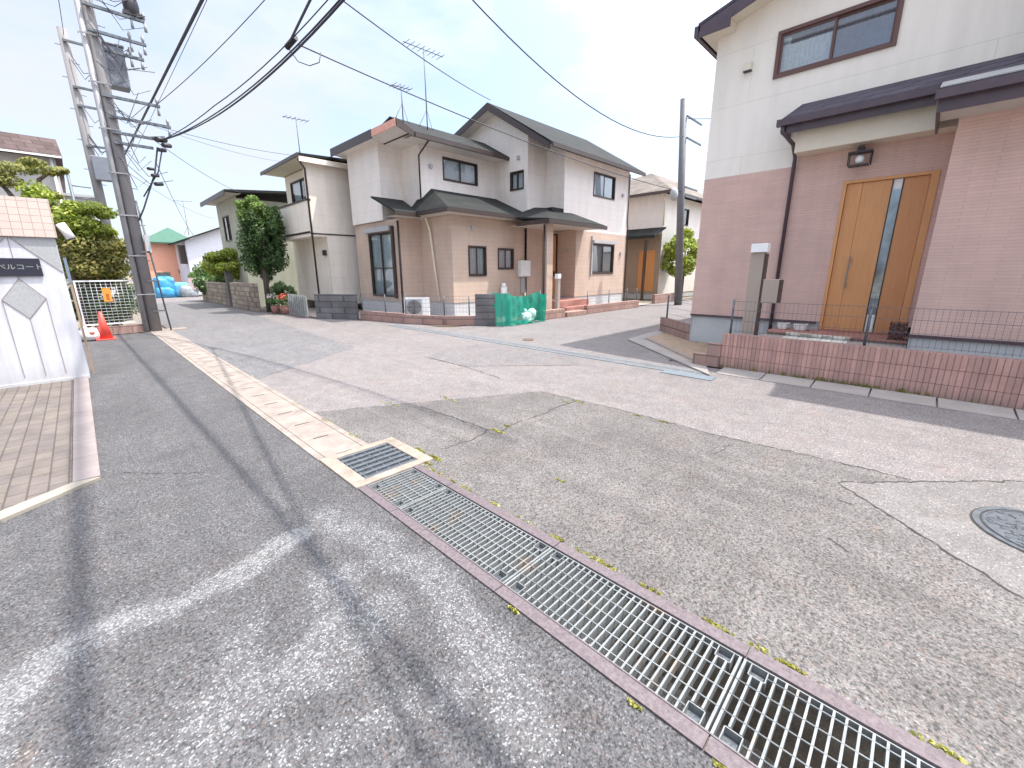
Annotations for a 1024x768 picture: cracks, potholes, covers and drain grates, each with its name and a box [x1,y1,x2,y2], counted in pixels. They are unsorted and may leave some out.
drain grate [709,658,935,768]
drain grate [505,549,743,732]
crack [421,401,575,449]
drain grate [400,487,552,585]
drain grate [368,468,446,508]
manhole cover [970,507,1024,552]
